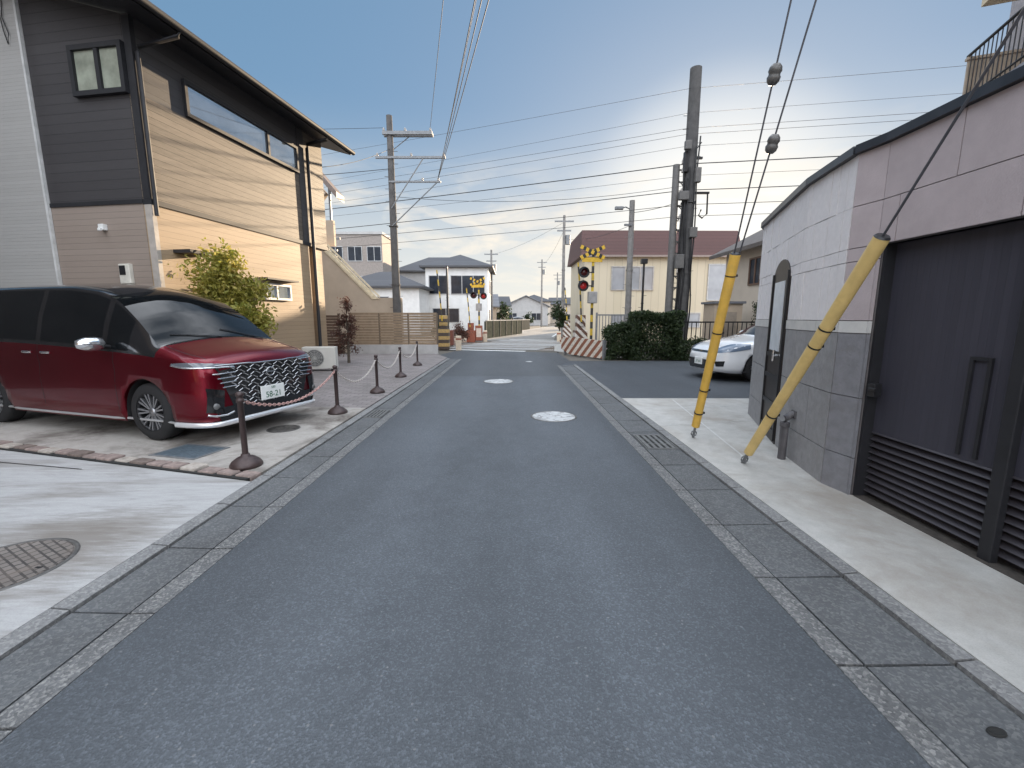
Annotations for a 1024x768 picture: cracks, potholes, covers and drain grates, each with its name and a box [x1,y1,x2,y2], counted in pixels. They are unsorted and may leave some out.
manhole cover [530,411,577,422]
drain grate [633,434,679,449]
manhole cover [0,538,81,591]
manhole cover [266,425,300,433]
drain grate [363,410,390,418]
